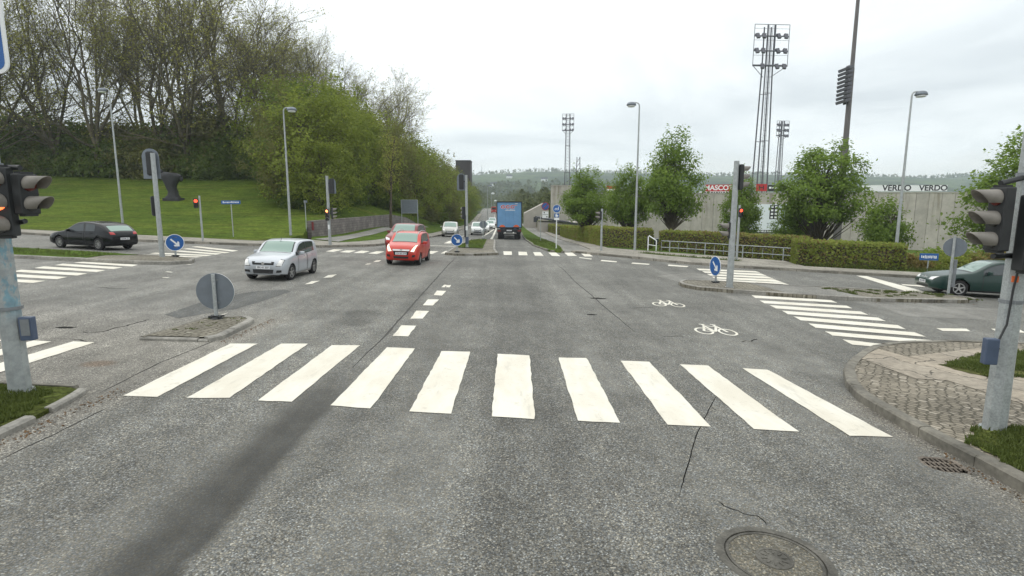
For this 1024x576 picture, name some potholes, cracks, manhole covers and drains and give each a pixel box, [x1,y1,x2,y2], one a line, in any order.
crack [679,397,718,495]
drain grate [918,456,972,474]
crack [70,319,149,342]
manhole cover [715,527,838,576]
